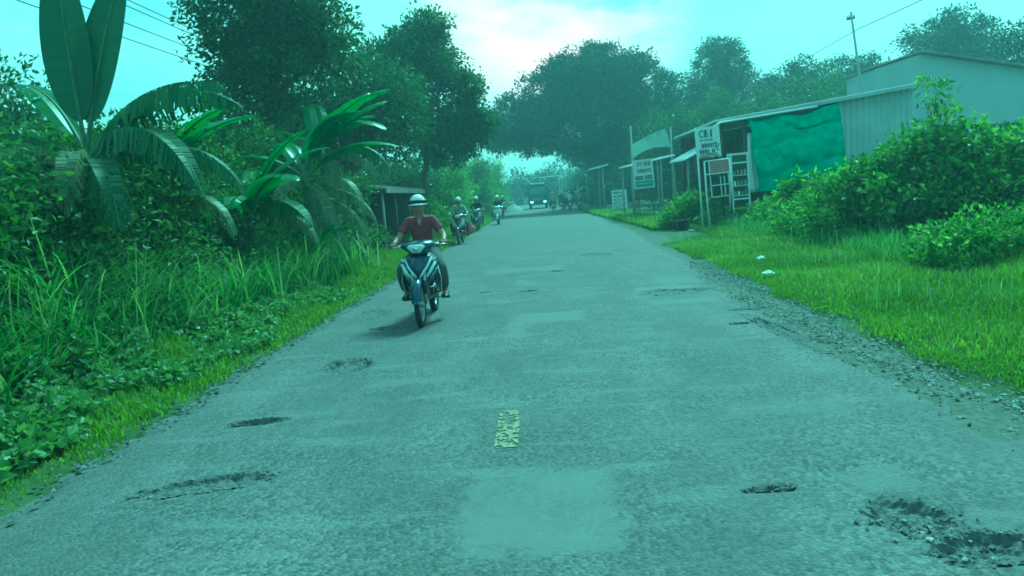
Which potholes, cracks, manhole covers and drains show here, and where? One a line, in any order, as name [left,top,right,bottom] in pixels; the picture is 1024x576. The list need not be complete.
pothole [121,469,290,501]
pothole [227,416,293,428]
pothole [638,287,719,296]
pothole [870,523,1024,570]
pothole [853,493,980,540]
pothole [320,357,378,374]
